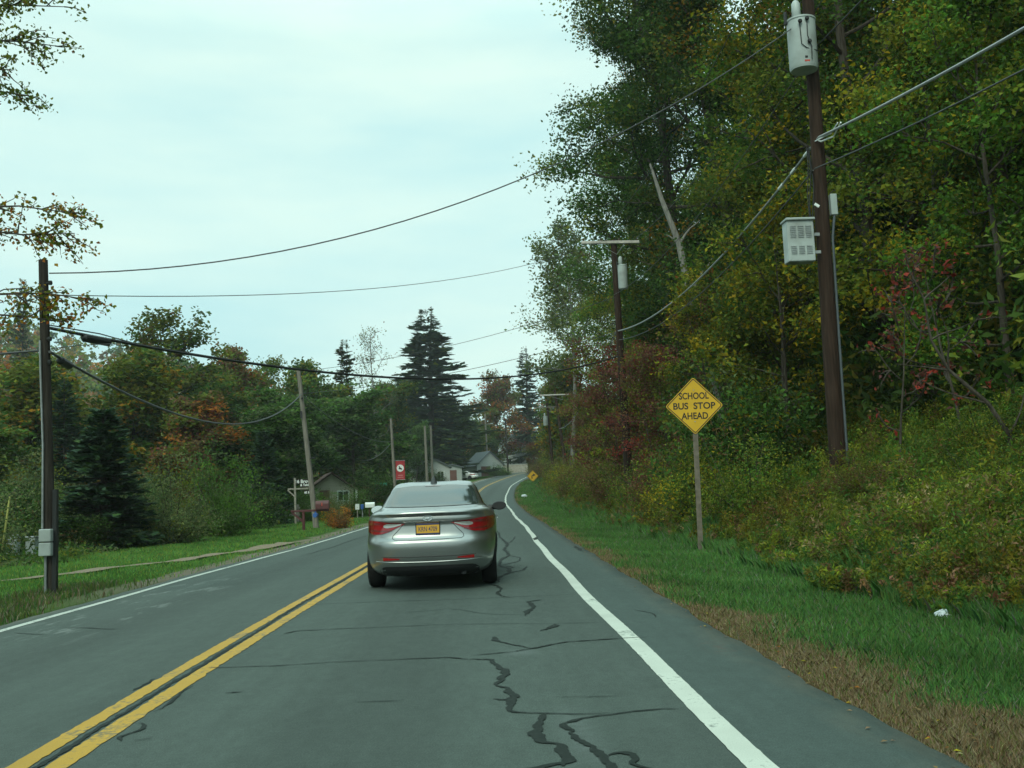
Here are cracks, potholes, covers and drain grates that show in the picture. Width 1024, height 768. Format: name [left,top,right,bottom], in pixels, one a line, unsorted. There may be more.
crack [117,678,193,741]
crack [283,531,636,655]
